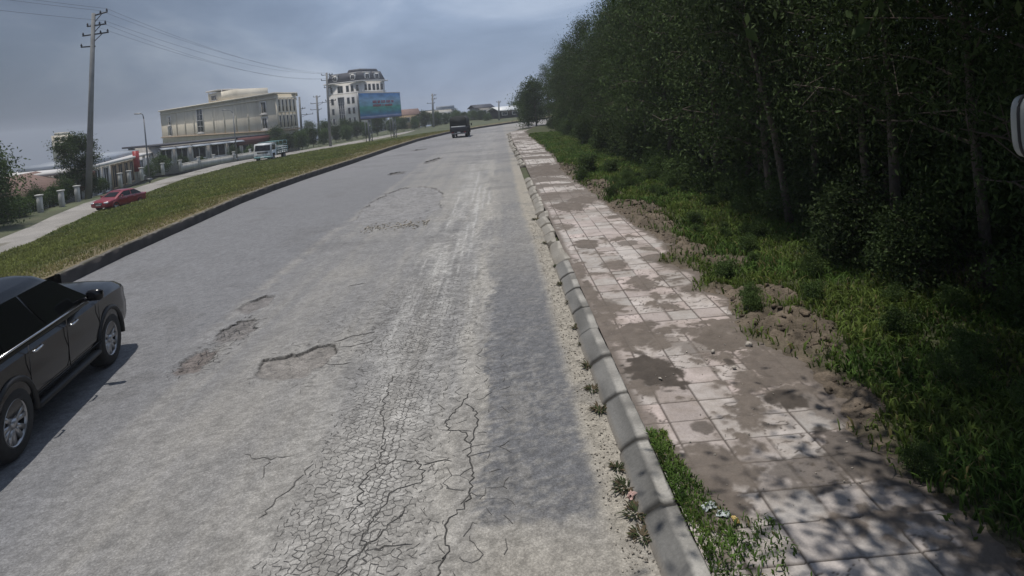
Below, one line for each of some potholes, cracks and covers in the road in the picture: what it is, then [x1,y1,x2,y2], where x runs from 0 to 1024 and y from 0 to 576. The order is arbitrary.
pothole [161,345,229,382]
pothole [246,341,347,386]
pothole [226,293,282,317]
pothole [201,317,268,353]
crack [248,335,519,576]
pothole [416,157,449,165]
